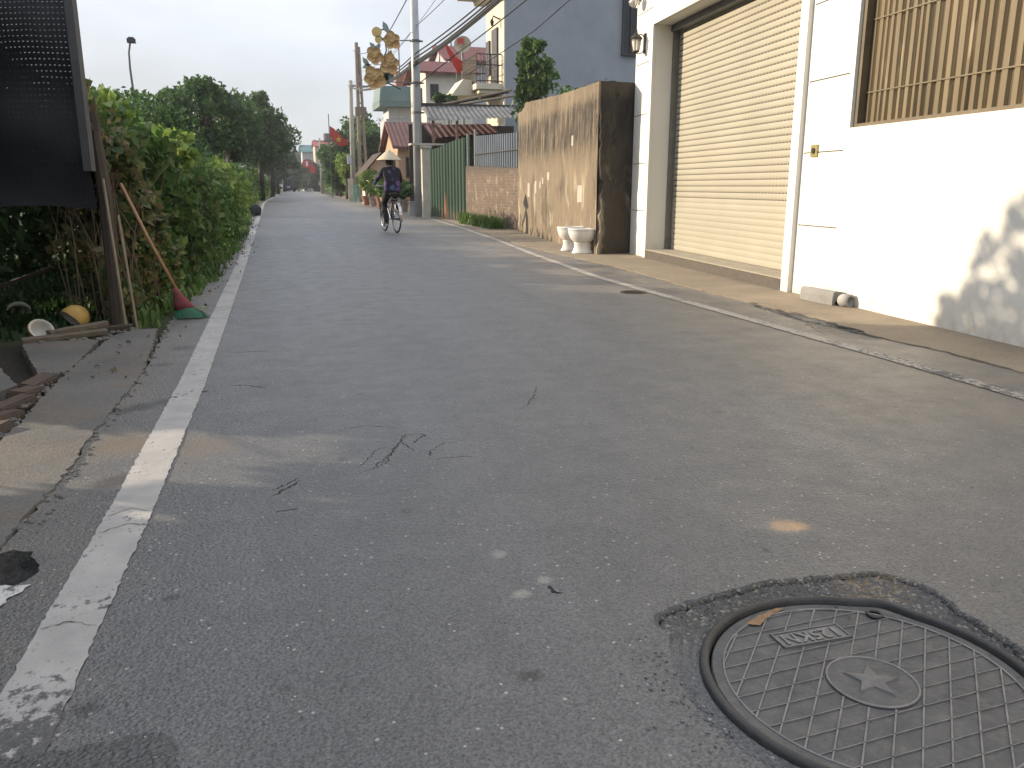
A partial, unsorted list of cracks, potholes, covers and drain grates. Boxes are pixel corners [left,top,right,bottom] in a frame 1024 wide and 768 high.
crack [273,478,298,513]
manhole cover [699,596,1024,768]
crack [342,425,477,474]
pothole [0,550,40,585]
